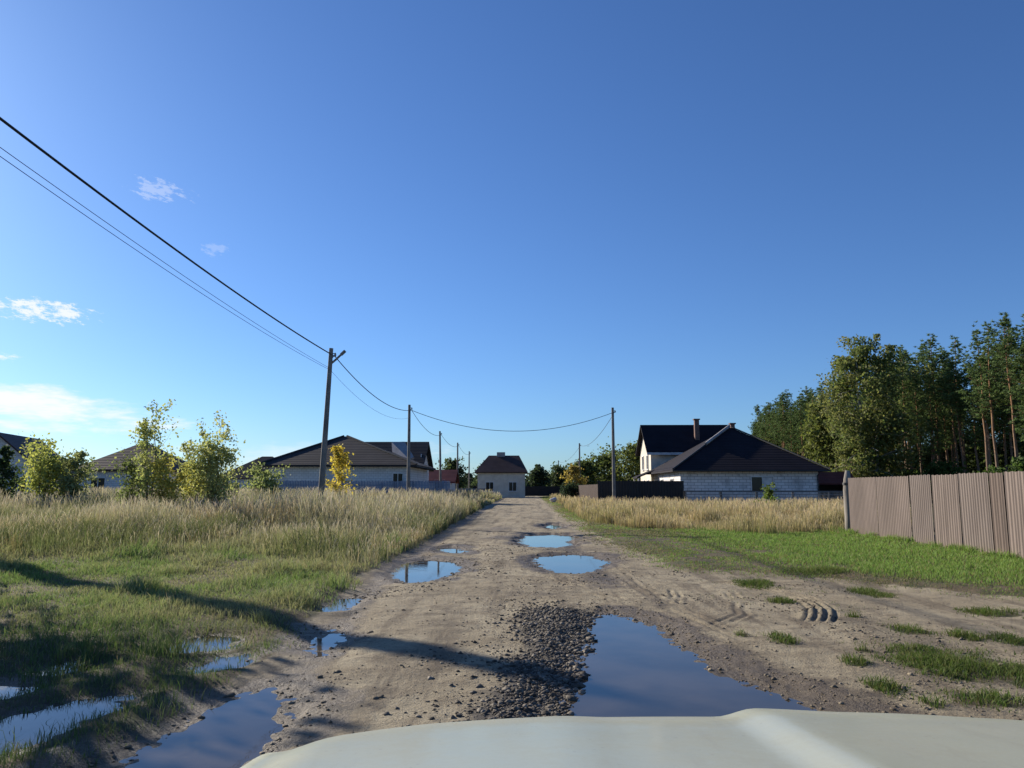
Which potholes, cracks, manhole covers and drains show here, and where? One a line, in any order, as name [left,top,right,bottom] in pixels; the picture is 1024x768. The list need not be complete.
pothole [513,533,582,548]
pothole [431,545,473,554]
pothole [532,610,848,717]
pothole [292,627,365,658]
pothole [384,558,471,583]
pothole [90,680,311,768]
pothole [526,553,617,574]
